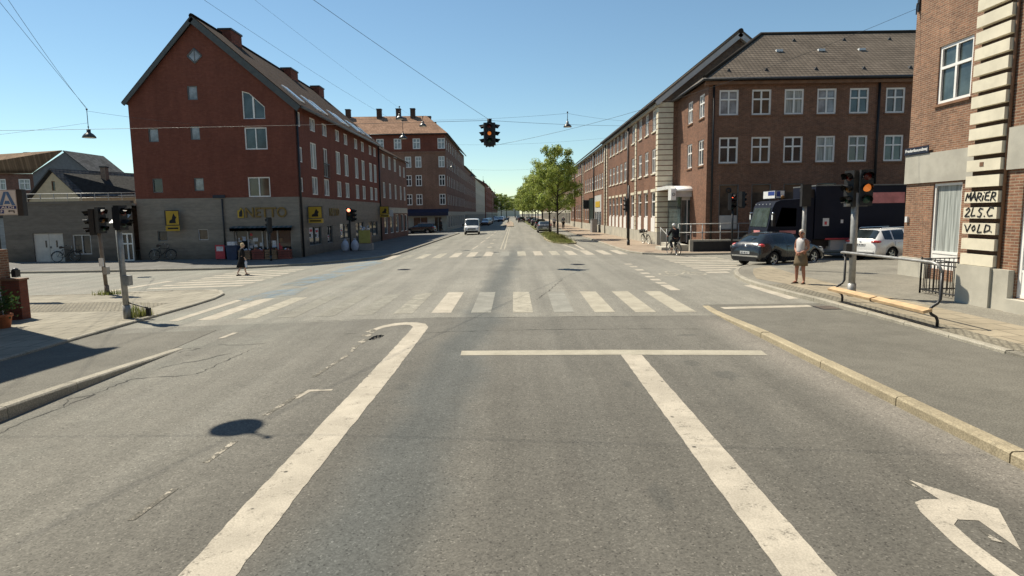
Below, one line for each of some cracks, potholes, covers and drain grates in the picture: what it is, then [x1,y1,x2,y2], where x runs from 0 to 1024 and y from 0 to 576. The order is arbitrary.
crack [1,343,263,433]
